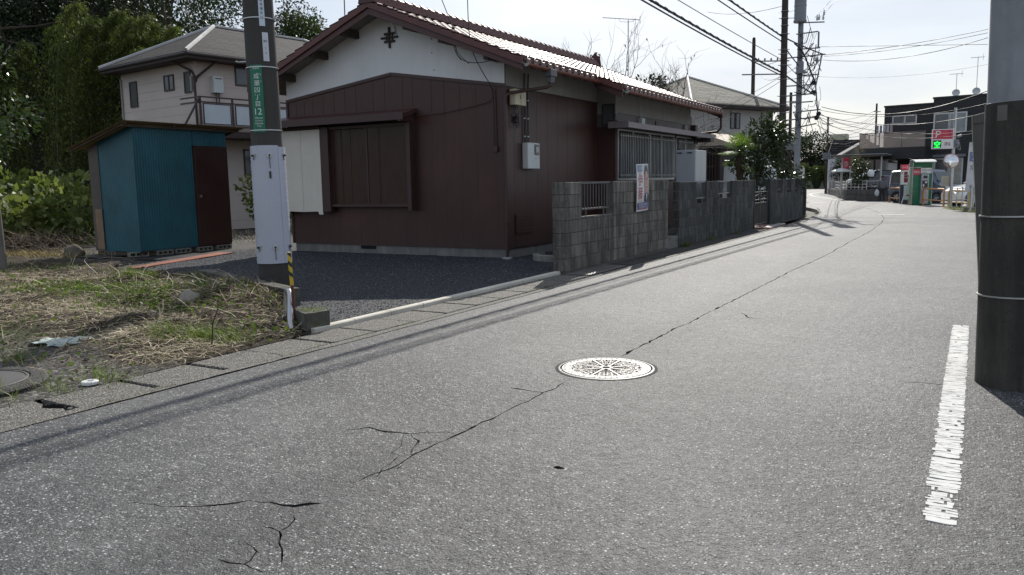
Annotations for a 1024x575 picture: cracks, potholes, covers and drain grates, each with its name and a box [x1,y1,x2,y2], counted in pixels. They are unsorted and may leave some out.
crack [134,500,322,572]
manhole cover [558,357,655,379]
manhole cover [0,367,49,404]
crack [373,435,437,477]
crack [625,207,883,355]
